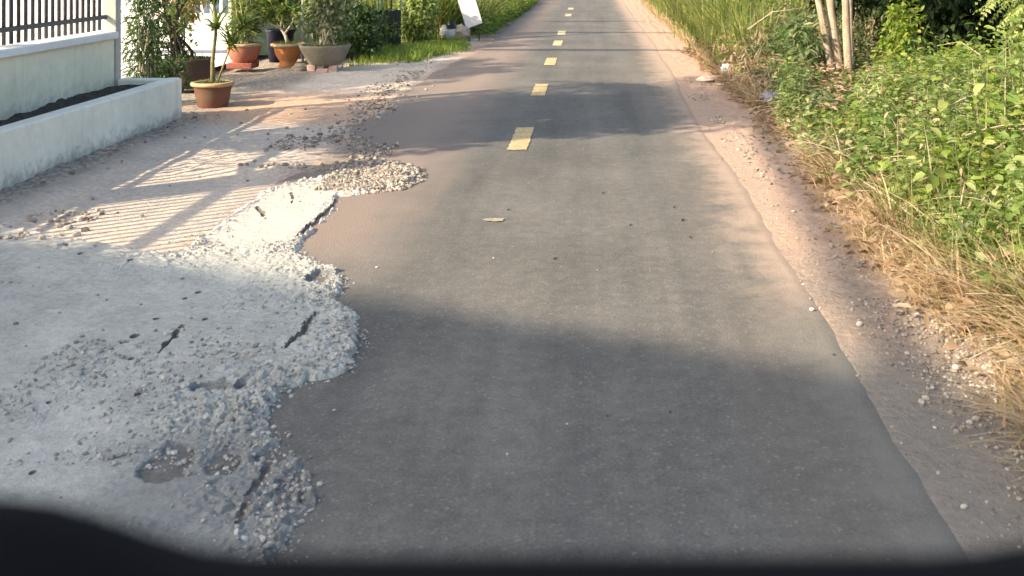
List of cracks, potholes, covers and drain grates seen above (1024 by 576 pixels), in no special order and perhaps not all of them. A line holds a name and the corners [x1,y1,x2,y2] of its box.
pothole [201,447,247,475]
crack [281,311,319,348]
crack [157,324,185,353]
crack [289,192,338,236]
pothole [188,378,235,392]
crack [234,466,271,524]
pothole [134,440,200,483]
pothole [234,377,247,389]
